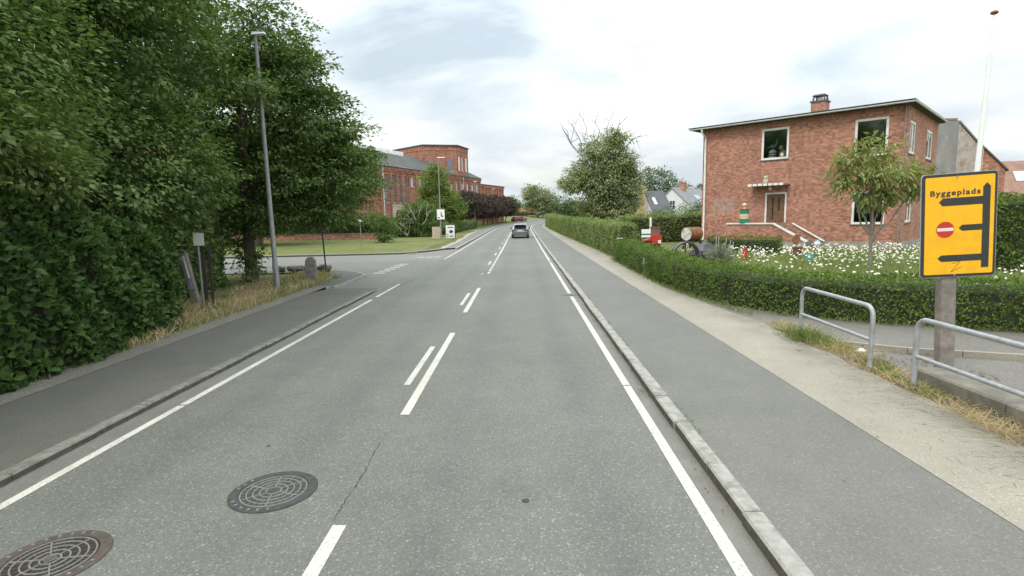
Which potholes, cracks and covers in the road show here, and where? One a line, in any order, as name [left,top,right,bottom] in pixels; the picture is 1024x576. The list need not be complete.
crack [333,430,391,521]
manhole cover [227,471,318,513]
manhole cover [0,530,113,576]
